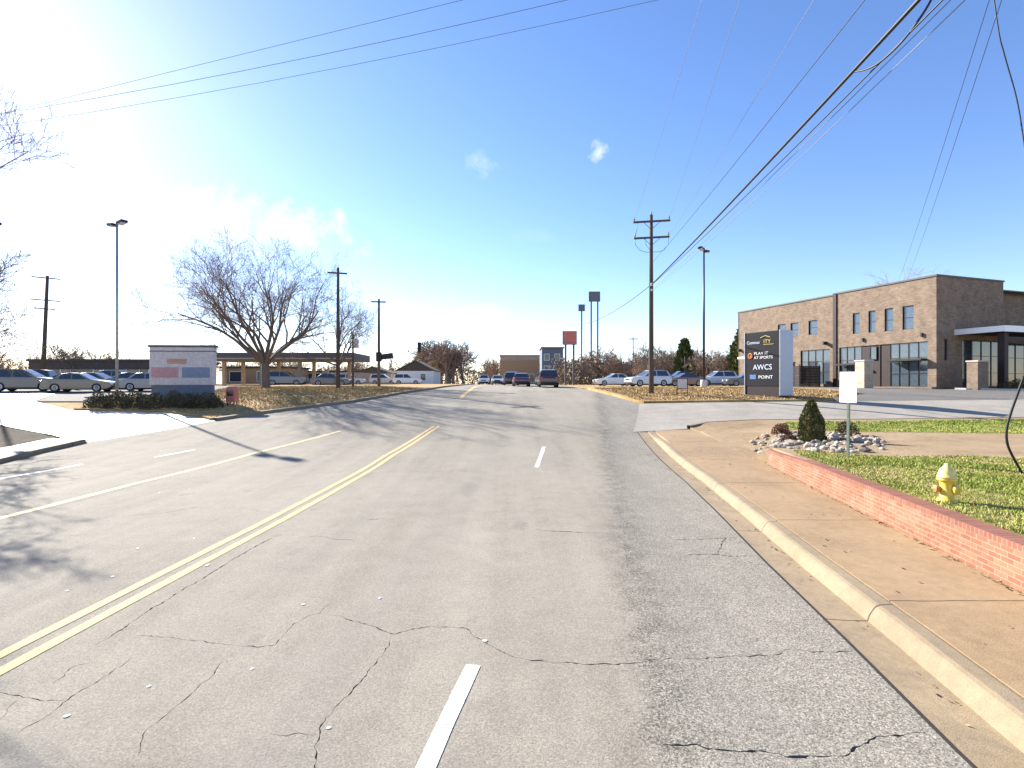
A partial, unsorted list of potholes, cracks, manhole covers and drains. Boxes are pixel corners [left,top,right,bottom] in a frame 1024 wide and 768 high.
crack [274,615,849,768]
crack [137,603,331,648]
crack [677,538,741,557]
crack [1,660,129,729]
crack [138,662,222,755]
crack [660,731,928,758]
crack [97,537,273,644]
